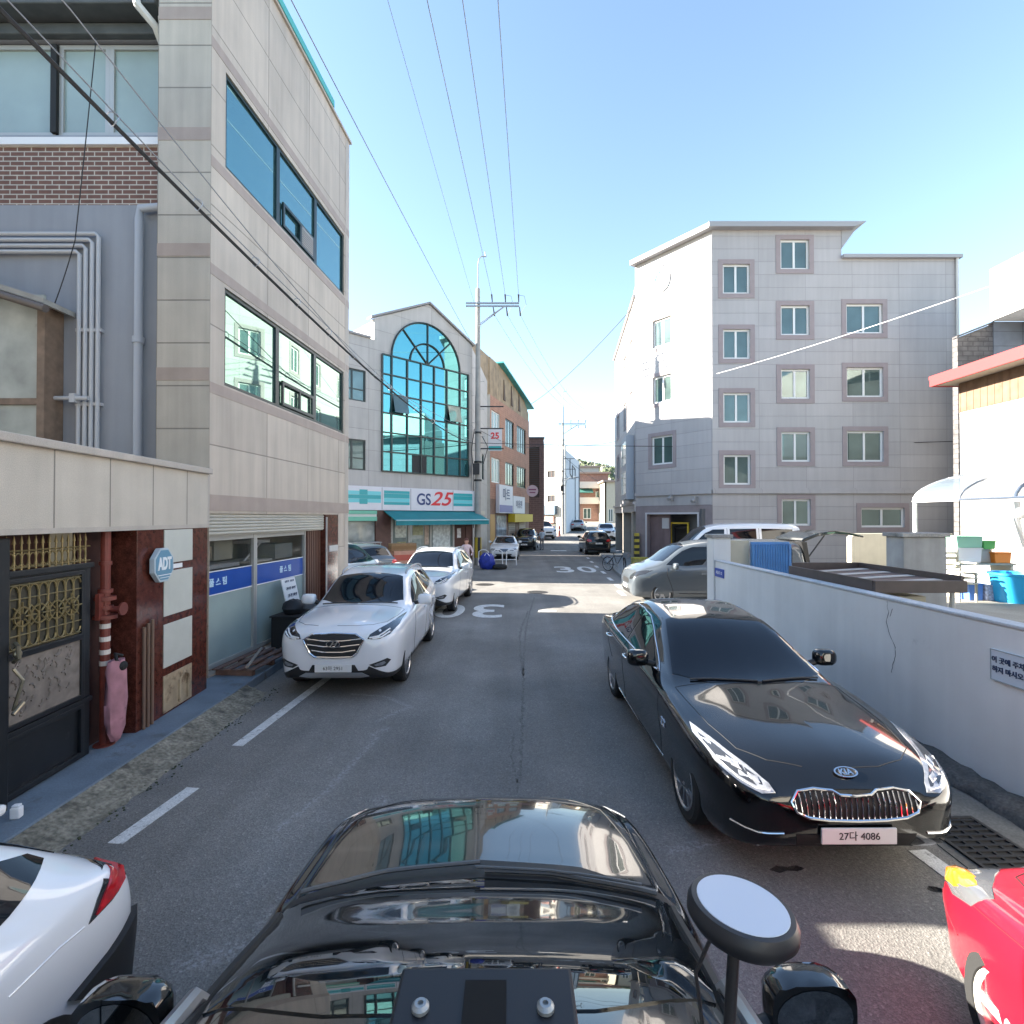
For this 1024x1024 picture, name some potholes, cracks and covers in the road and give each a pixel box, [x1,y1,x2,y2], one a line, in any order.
drain grate [944,816,1024,869]
crack [498,585,586,793]
